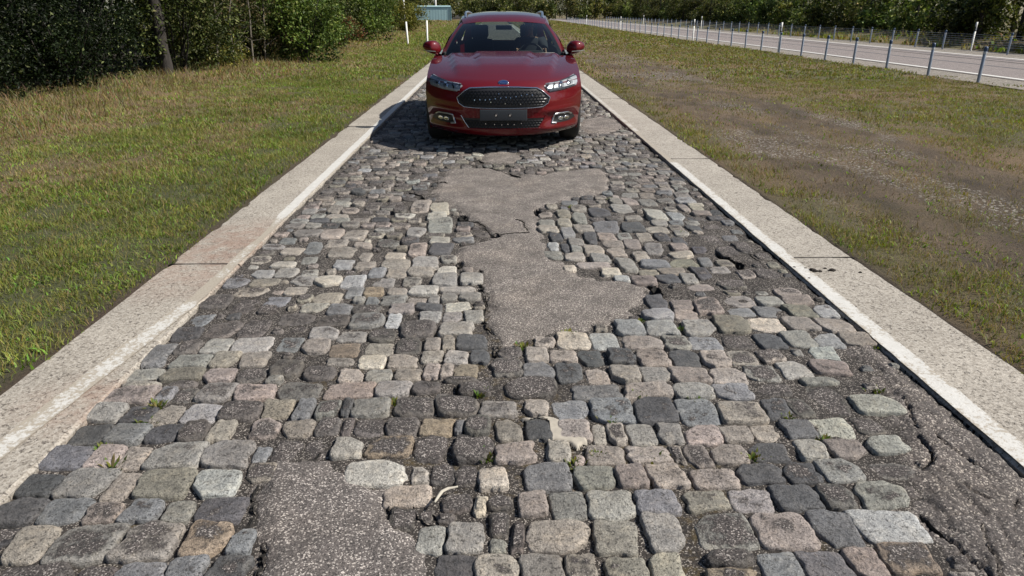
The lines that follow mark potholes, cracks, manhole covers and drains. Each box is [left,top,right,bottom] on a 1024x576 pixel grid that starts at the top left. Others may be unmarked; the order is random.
crack [920,515,999,576]
crack [892,360,992,471]
crack [460,216,530,237]
